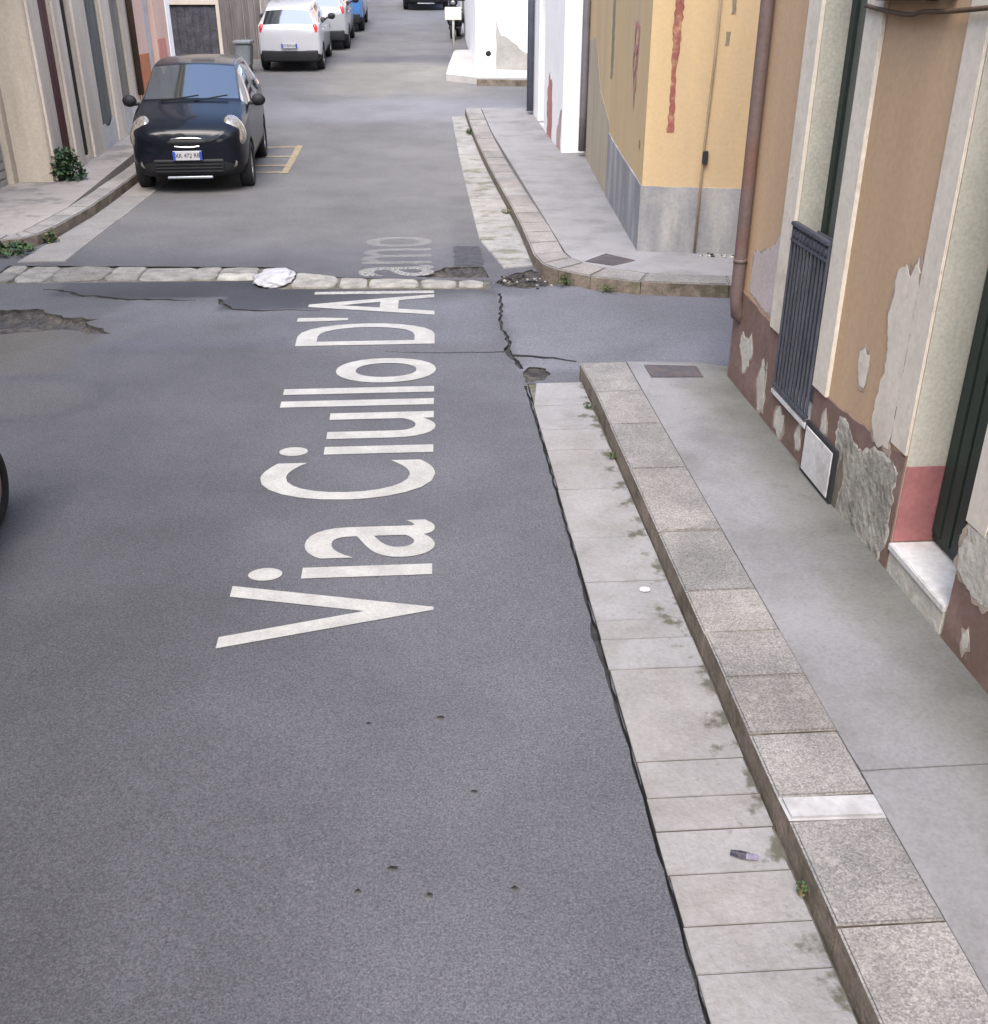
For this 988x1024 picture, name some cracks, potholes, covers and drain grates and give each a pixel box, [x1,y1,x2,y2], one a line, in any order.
manhole cover [644,365,703,377]
pothole [0,309,111,334]
pothole [523,367,551,383]
pothole [417,266,489,279]
crack [217,299,320,311]
crack [403,293,577,369]
manhole cover [585,253,635,266]
pothole [497,270,550,289]
crack [43,289,192,301]
